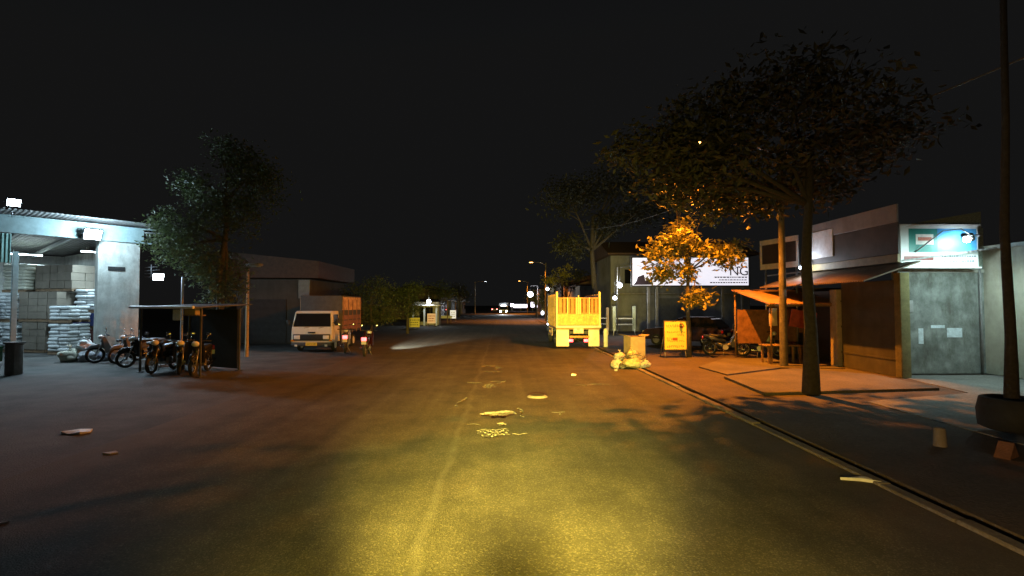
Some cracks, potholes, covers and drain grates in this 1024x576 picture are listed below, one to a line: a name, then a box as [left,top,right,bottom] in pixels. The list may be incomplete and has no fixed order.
pothole [479,410,516,419]
pothole [477,428,510,438]
